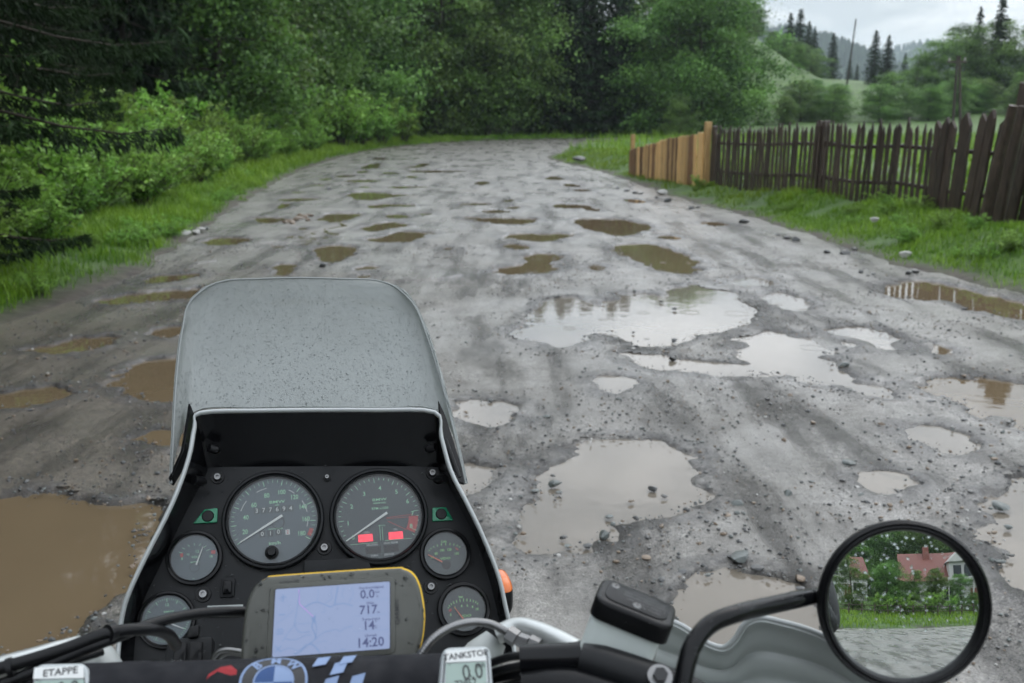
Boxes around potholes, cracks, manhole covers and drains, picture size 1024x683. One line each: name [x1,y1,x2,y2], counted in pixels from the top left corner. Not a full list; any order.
pothole [570,369,663,401]
pothole [603,326,923,402]
pothole [826,459,949,505]
pothole [561,216,667,237]
pothole [493,279,772,355]
pothole [949,465,1024,612]
pothole [863,276,1024,328]
pothole [83,351,177,410]
pothole [475,250,576,278]
pothole [448,392,543,435]
pothole [0,380,97,414]
pothole [876,415,1011,464]
